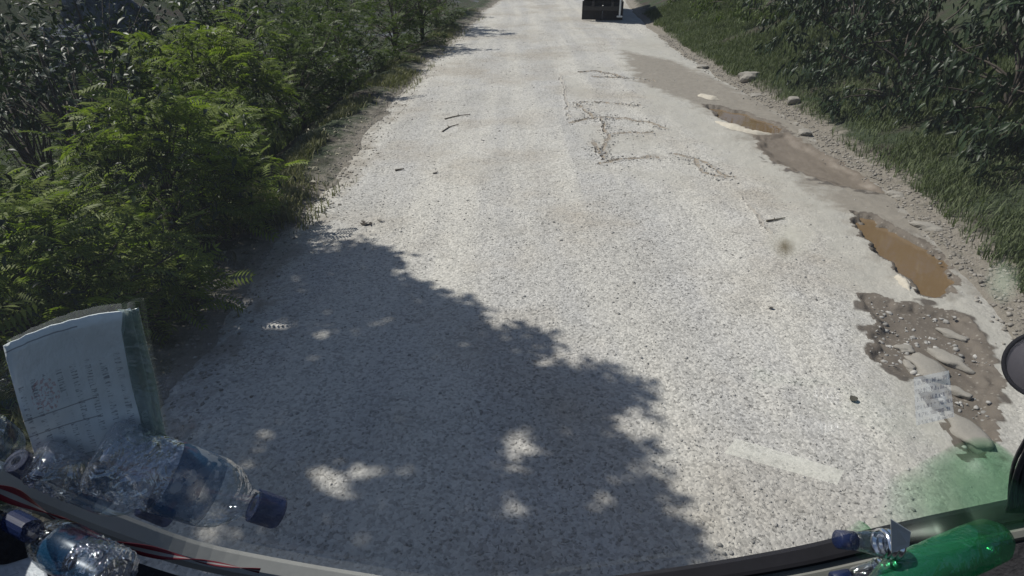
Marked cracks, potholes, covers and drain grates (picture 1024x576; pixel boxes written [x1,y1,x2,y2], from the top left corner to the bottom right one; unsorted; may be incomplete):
pothole [856,292,1007,462]
pothole [753,132,885,194]
pothole [702,104,792,134]
crack [558,70,736,178]
pothole [849,210,962,298]
